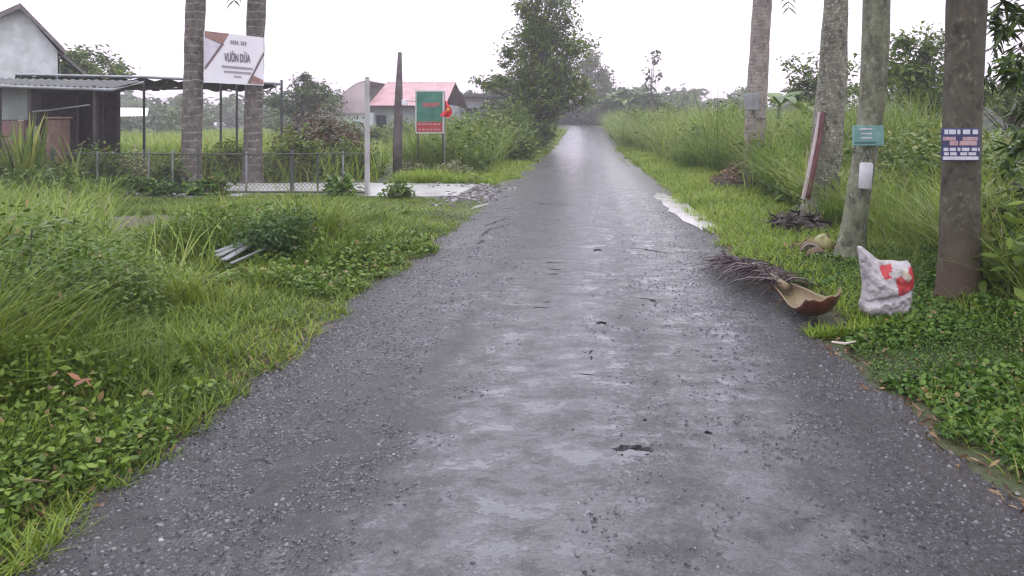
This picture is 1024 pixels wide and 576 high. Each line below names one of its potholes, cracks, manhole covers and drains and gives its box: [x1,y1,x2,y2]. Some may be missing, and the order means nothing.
crack [477,208,513,244]
pothole [611,444,655,456]
